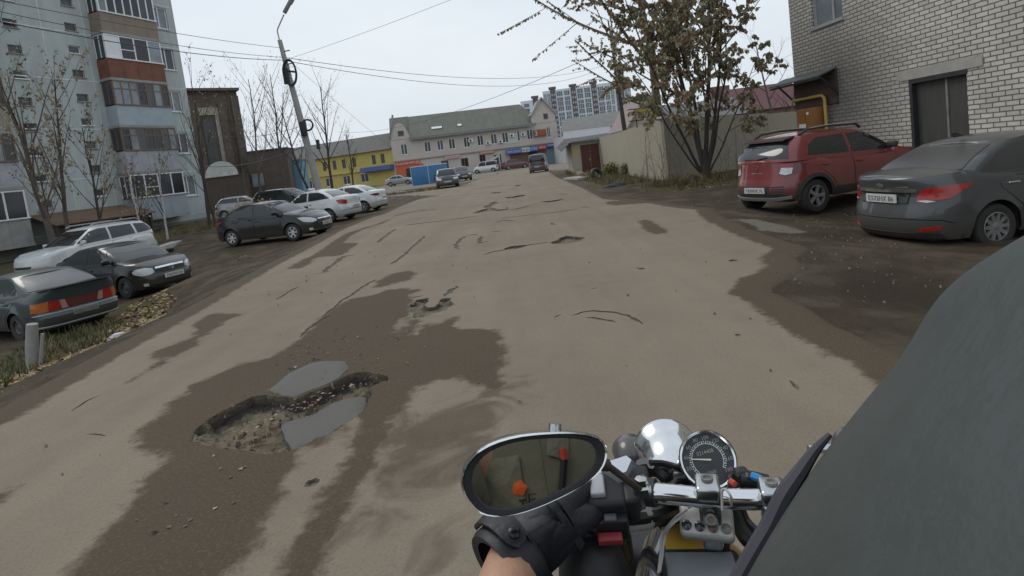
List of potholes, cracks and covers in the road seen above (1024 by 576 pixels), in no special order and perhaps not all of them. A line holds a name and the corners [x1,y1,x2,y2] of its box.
crack [454,185,549,255]
pothole [190,372,389,454]
crack [300,209,437,337]
crack [554,310,643,325]
pothole [409,298,455,318]
